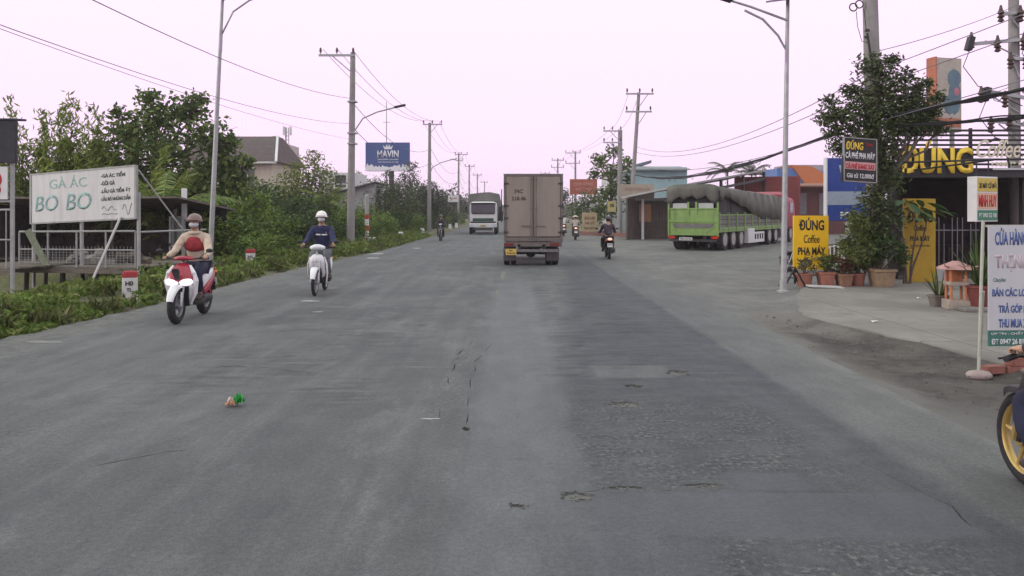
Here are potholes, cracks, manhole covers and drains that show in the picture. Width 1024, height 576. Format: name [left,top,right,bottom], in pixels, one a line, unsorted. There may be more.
crack [439,340,491,425]
pothole [607,399,641,407]
crack [863,462,972,527]
pothole [559,489,595,502]
